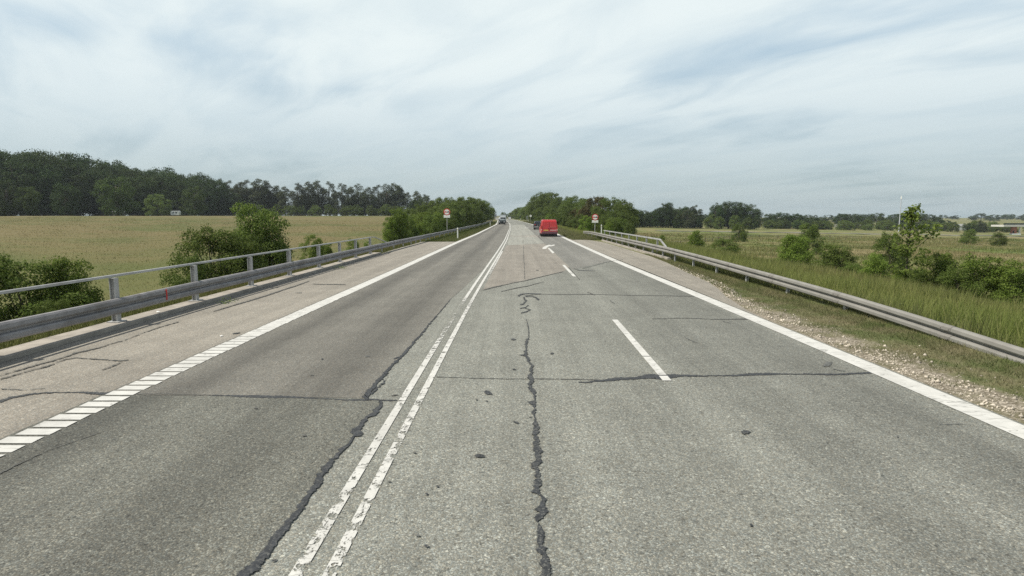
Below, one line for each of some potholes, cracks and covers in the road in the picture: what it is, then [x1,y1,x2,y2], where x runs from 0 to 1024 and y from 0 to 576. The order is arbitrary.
crack [504,282,541,313]
crack [0,321,179,403]
